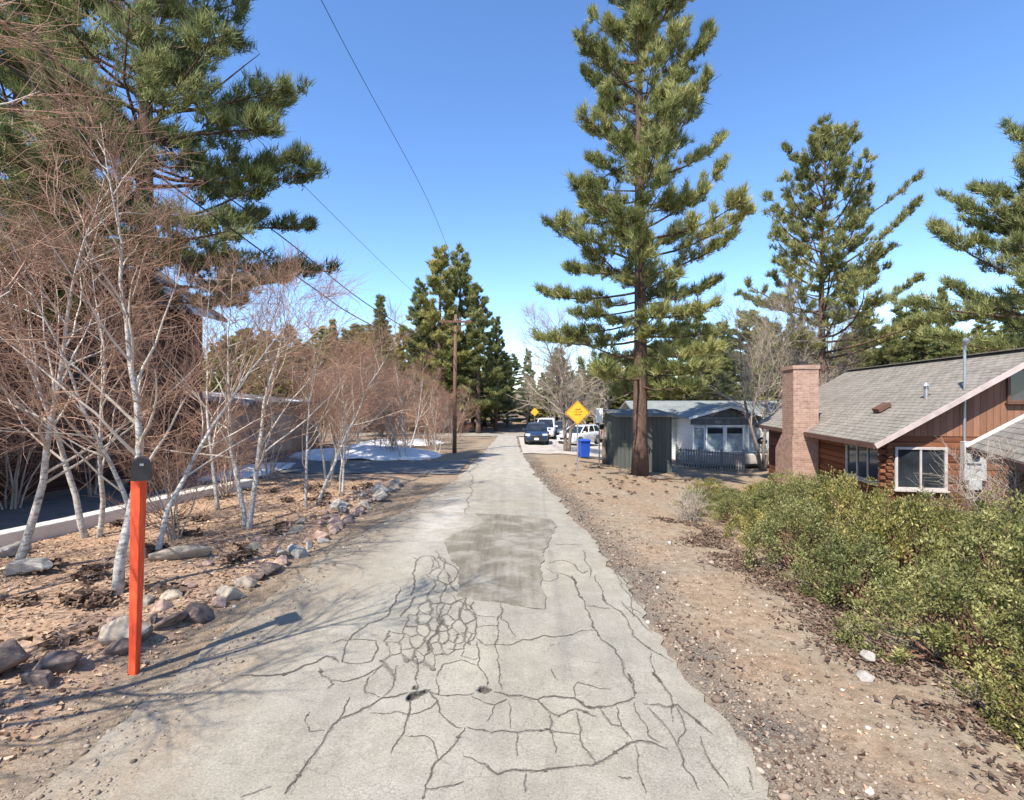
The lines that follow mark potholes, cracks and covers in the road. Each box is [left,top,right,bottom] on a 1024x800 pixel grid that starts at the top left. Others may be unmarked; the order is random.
crack [240,534,729,800]
pothole [405,689,430,702]
